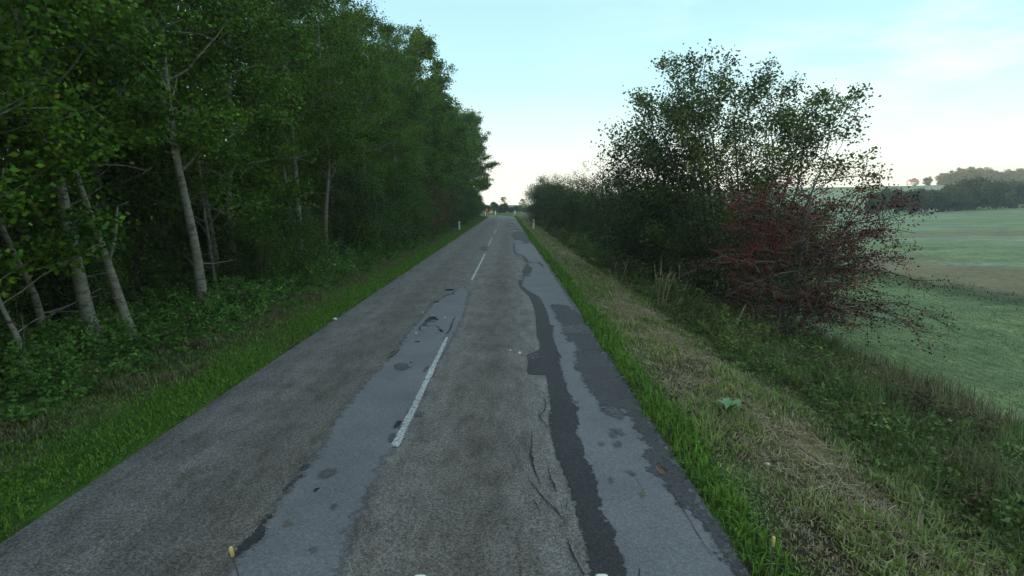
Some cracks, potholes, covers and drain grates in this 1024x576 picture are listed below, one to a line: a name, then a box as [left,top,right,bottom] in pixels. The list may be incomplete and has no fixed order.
crack [528,397,567,518]
crack [567,539,585,575]
